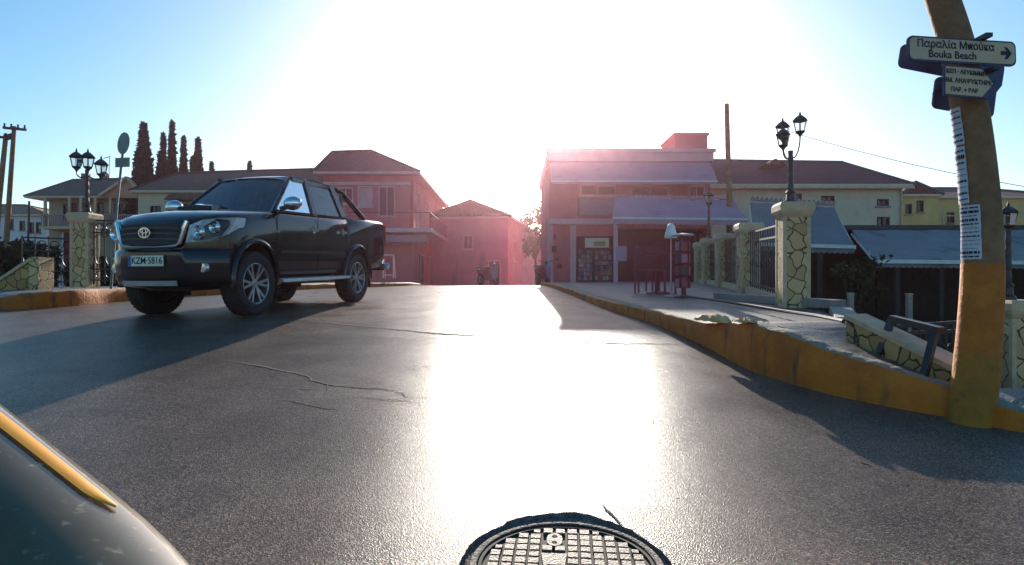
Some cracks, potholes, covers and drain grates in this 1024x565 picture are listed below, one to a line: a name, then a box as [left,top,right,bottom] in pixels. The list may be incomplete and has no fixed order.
crack [210,359,426,409]
manhole cover [469,522,664,565]
crack [303,319,696,345]
